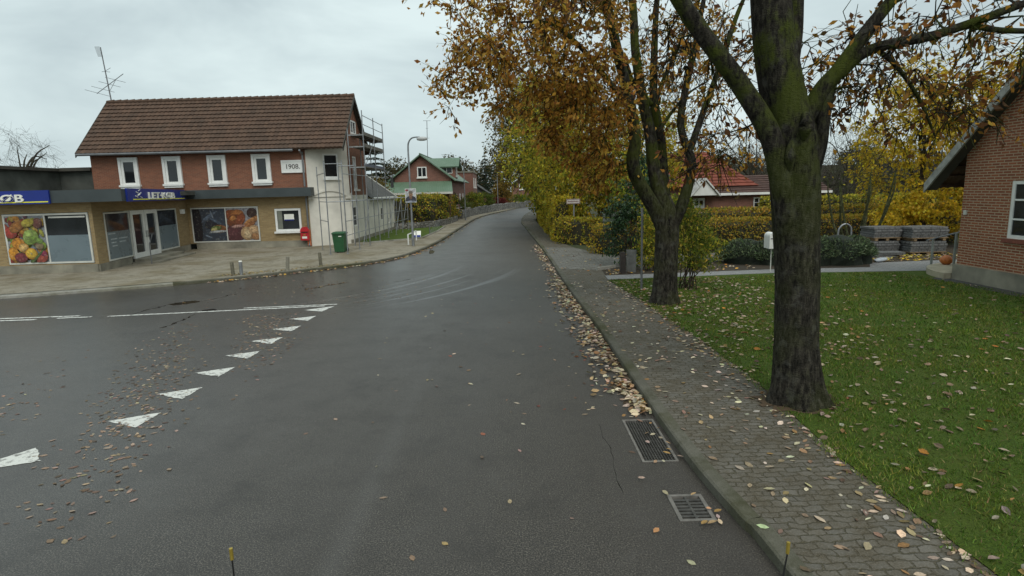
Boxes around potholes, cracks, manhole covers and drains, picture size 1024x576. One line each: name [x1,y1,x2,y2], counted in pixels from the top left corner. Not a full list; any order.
drain grate [622,419,679,463]
drain grate [666,494,718,522]
